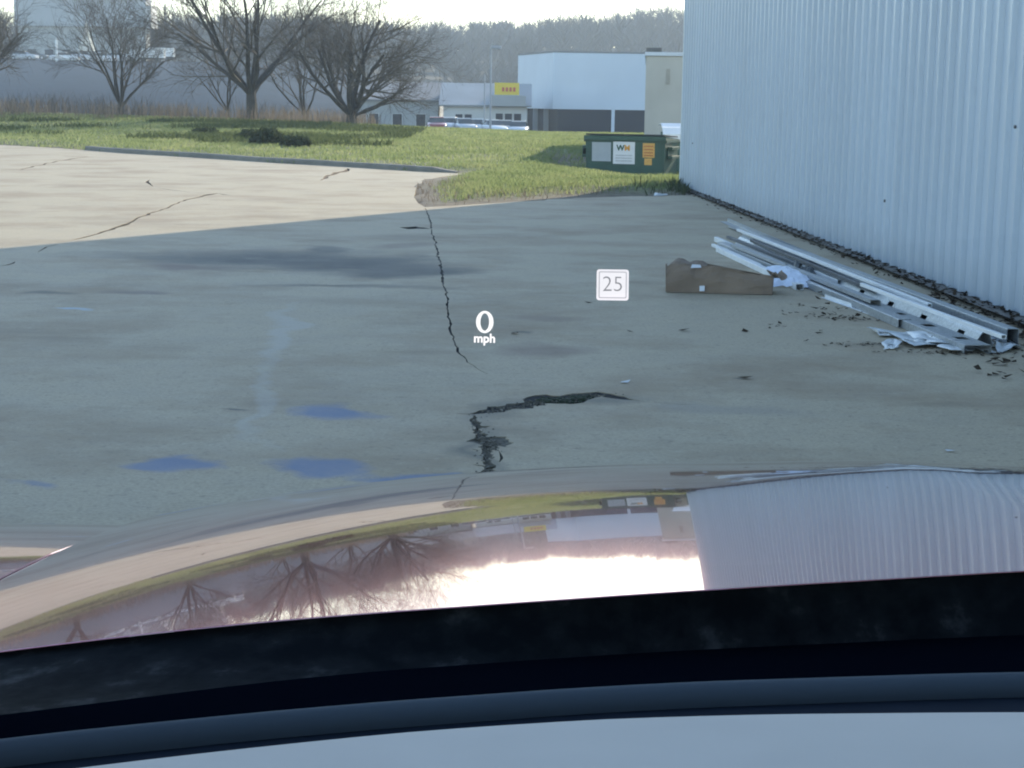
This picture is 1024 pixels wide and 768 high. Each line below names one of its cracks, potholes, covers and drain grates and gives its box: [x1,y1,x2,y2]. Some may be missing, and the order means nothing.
crack [321,169,350,180]
crack [425,209,476,368]
crack [468,392,630,472]
crack [75,194,224,240]
